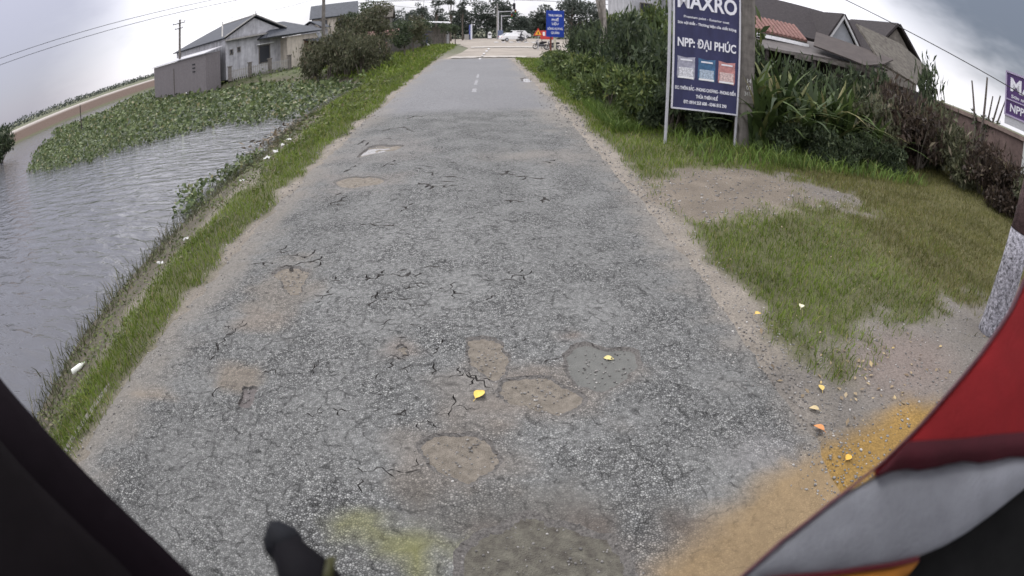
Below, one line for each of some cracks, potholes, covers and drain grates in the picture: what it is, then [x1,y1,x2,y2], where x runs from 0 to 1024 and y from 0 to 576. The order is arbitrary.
crack [354,459,419,495]
pothole [491,373,588,417]
pothole [357,144,404,158]
crack [254,246,342,303]
crack [484,270,532,301]
crack [501,160,555,203]
crack [208,319,248,361]
pothole [560,341,643,396]
pothole [464,335,513,383]
crack [365,266,494,429]
crack [361,162,465,227]
pothole [414,431,509,488]
